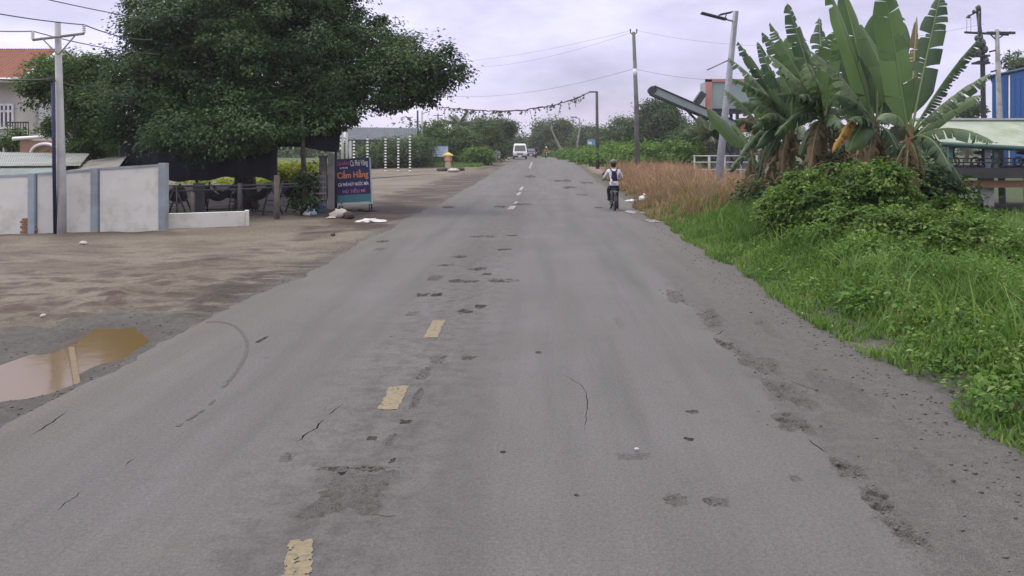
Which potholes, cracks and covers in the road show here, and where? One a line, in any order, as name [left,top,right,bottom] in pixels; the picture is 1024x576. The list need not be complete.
crack [278,405,400,520]
